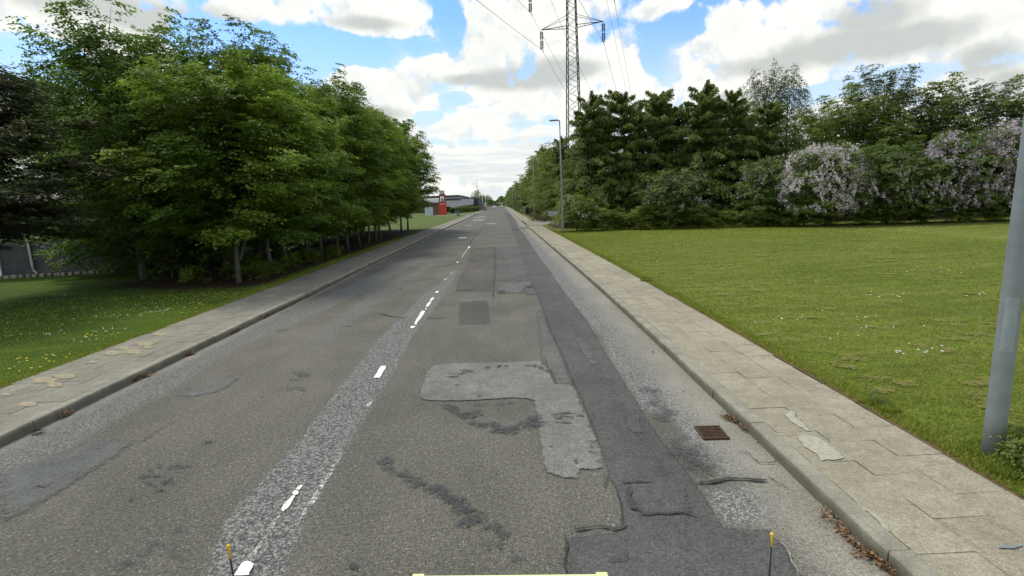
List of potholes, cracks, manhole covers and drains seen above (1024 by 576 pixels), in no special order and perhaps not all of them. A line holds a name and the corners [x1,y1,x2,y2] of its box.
drain grate [694,425,730,440]
